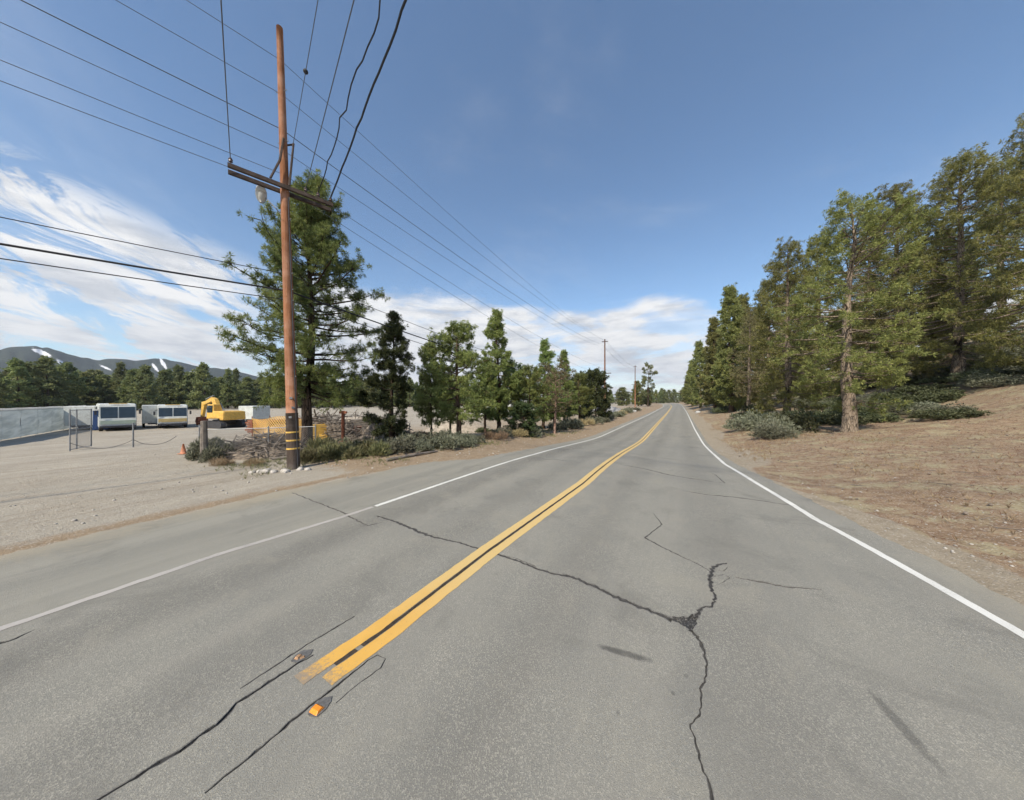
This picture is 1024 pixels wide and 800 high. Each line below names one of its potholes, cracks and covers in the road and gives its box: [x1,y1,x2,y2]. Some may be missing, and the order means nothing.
crack [293,493,822,800]
crack [95,654,386,800]
crack [626,465,789,505]
